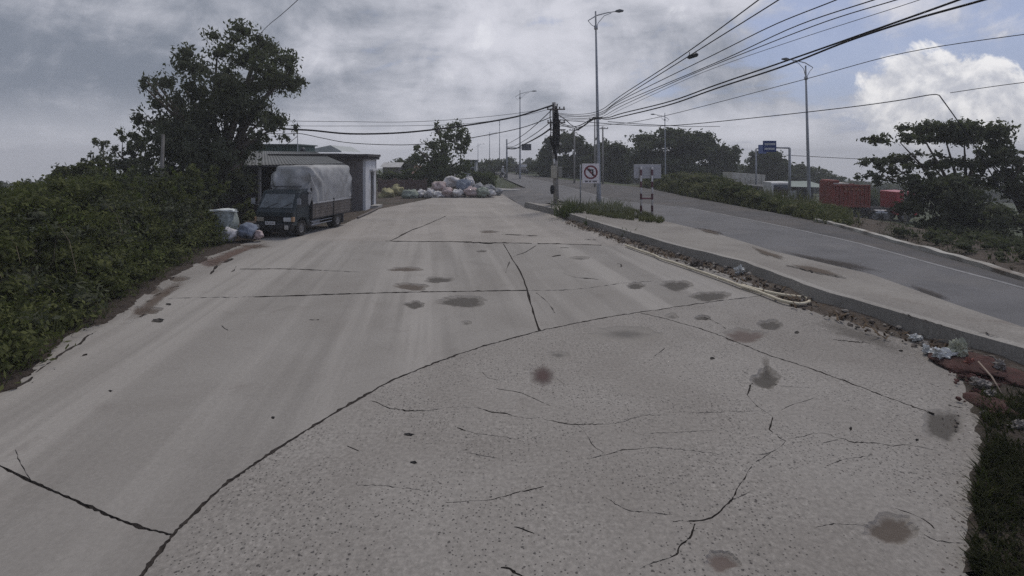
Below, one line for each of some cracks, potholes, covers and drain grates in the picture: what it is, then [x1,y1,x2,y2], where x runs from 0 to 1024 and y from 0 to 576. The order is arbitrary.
crack [461,234,651,313]
crack [372,372,933,569]
